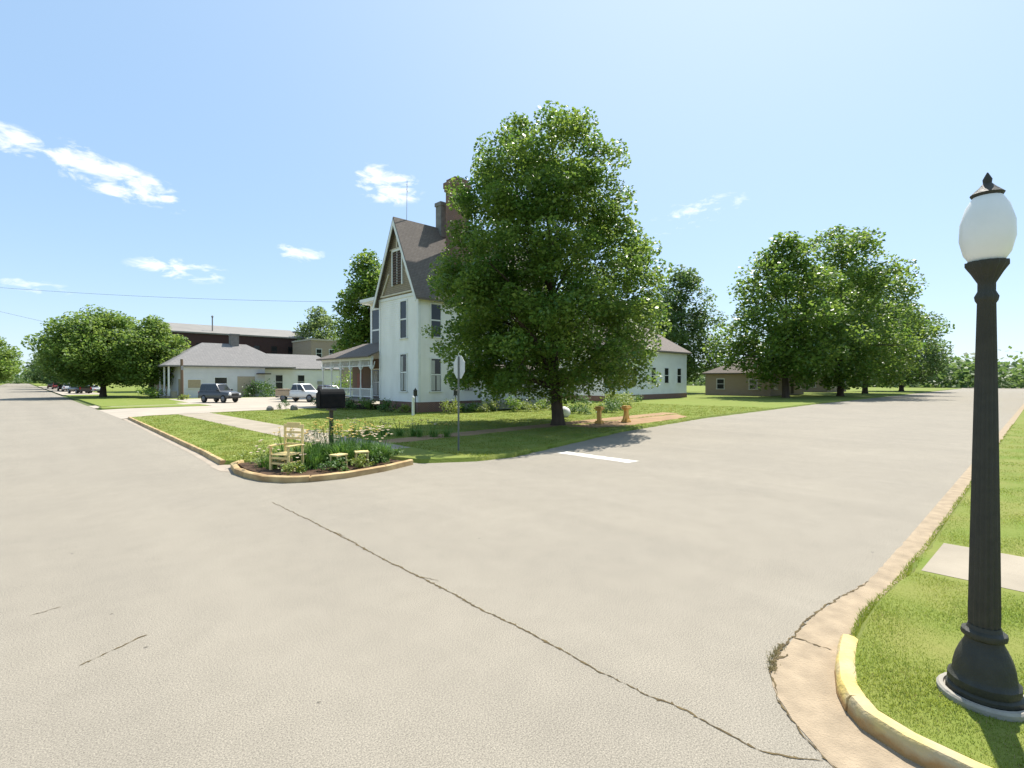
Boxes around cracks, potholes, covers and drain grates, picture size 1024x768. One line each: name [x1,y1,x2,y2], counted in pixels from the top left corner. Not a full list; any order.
crack [273,502,868,768]
